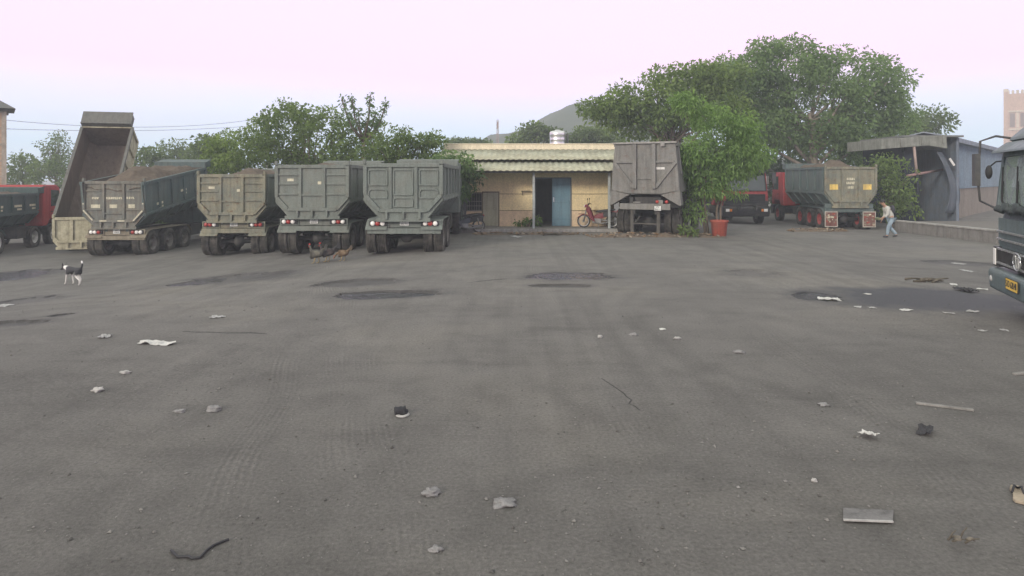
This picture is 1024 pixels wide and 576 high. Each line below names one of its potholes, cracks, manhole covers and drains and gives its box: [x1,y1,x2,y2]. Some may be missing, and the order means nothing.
crack [601,378,640,410]
